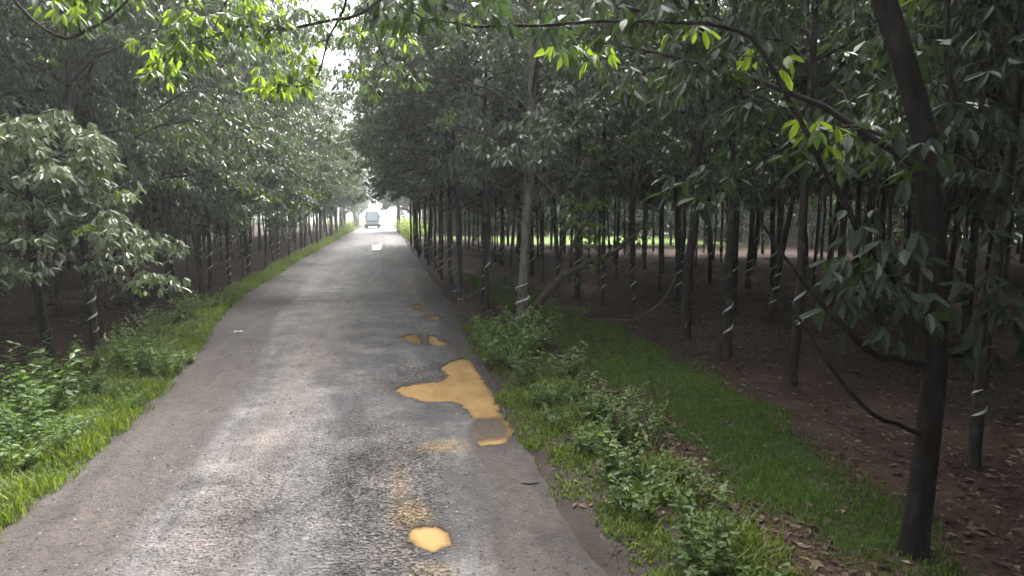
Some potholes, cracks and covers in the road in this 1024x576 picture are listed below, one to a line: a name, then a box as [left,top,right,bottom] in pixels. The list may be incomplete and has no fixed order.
pothole [399,334,423,344]
pothole [394,358,515,446]
pothole [426,335,449,346]
pothole [407,524,454,552]
